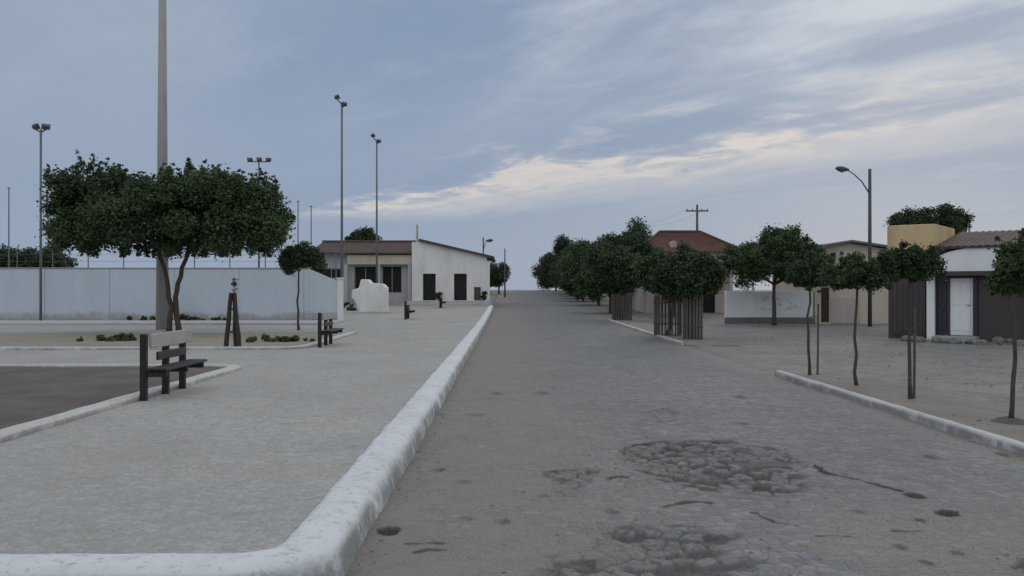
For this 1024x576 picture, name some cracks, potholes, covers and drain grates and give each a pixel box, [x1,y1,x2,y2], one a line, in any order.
pothole [931,509,962,518]
pothole [507,522,789,576]
pothole [617,440,821,502]
crack [797,459,906,492]
pothole [523,468,605,506]
pothole [372,525,403,537]
crack [747,511,854,538]
crack [661,500,715,508]
